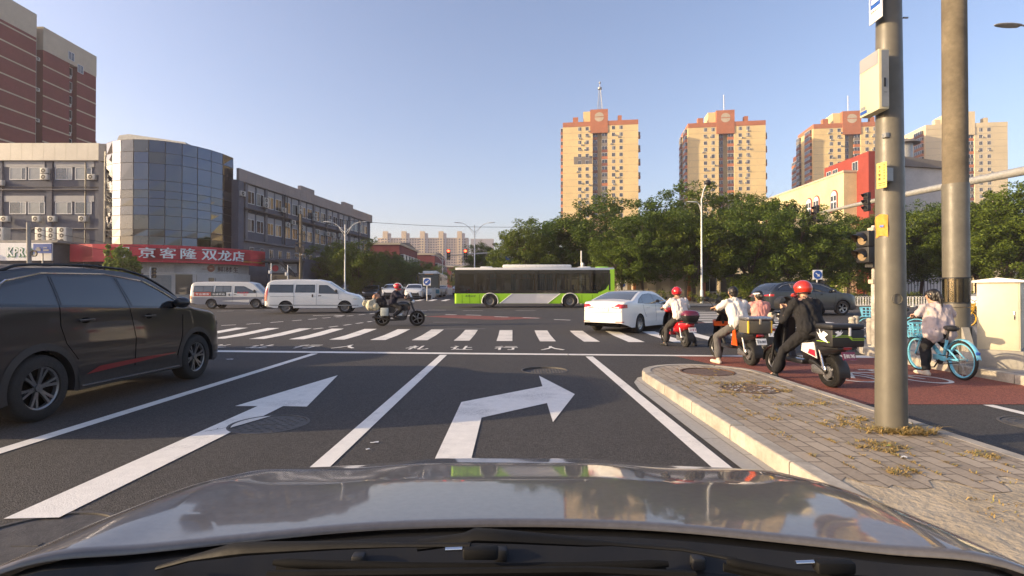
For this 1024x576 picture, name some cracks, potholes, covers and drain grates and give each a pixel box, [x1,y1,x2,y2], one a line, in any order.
manhole cover [719,383,781,394]
manhole cover [680,368,736,376]
manhole cover [226,415,310,434]
manhole cover [996,416,1024,428]
